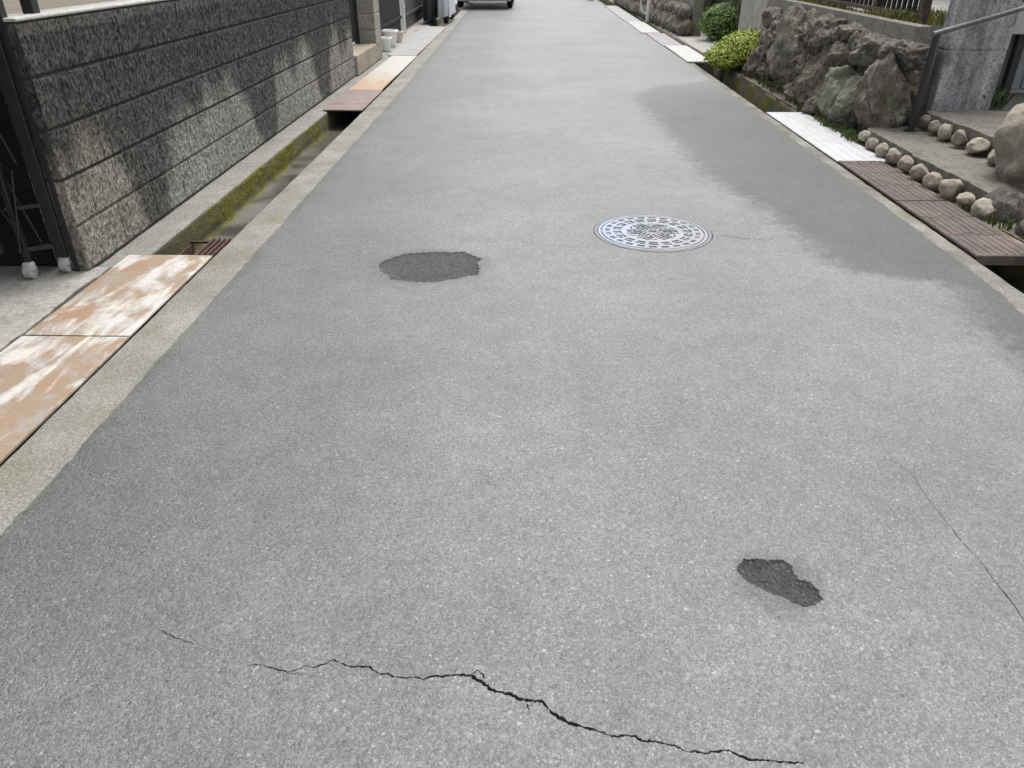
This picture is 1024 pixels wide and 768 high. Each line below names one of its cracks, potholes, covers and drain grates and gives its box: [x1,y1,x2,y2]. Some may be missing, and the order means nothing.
manhole cover [594,214,712,252]
crack [160,630,804,765]
drain grate [179,238,231,284]
pothole [736,558,824,607]
